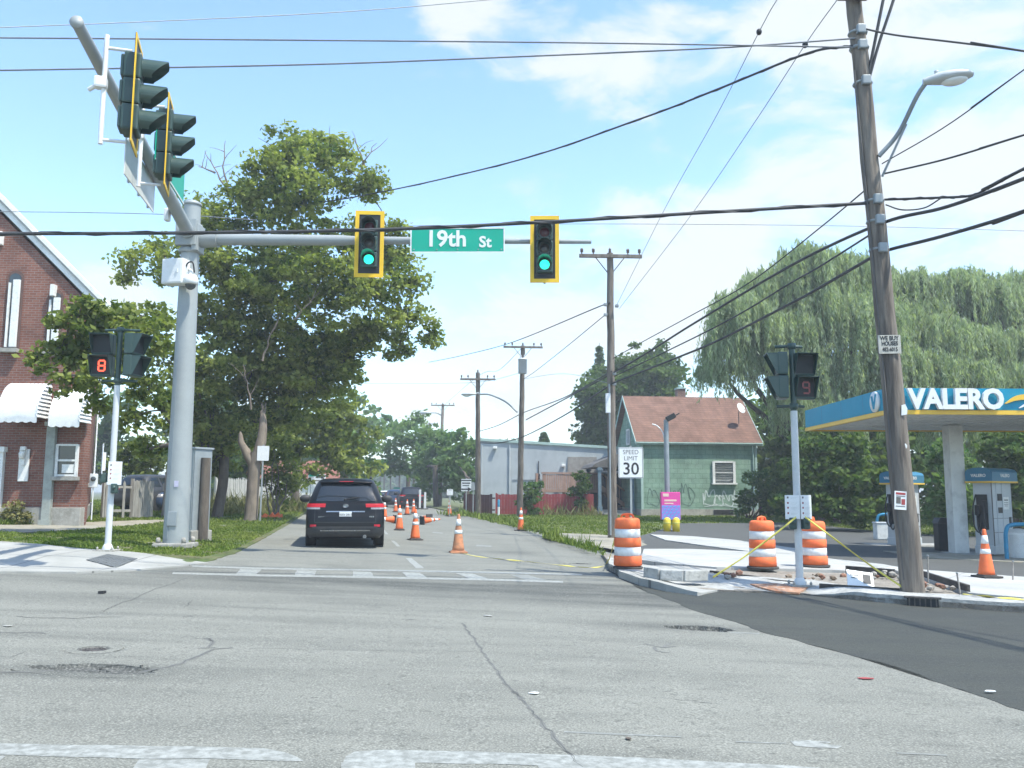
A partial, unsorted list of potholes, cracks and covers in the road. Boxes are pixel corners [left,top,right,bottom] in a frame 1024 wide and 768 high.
drain grate [904,596,942,608]
pothole [644,623,753,634]
manhole cover [65,644,123,654]
pothole [1,660,184,678]
crack [141,623,583,767]
crack [0,578,186,673]
